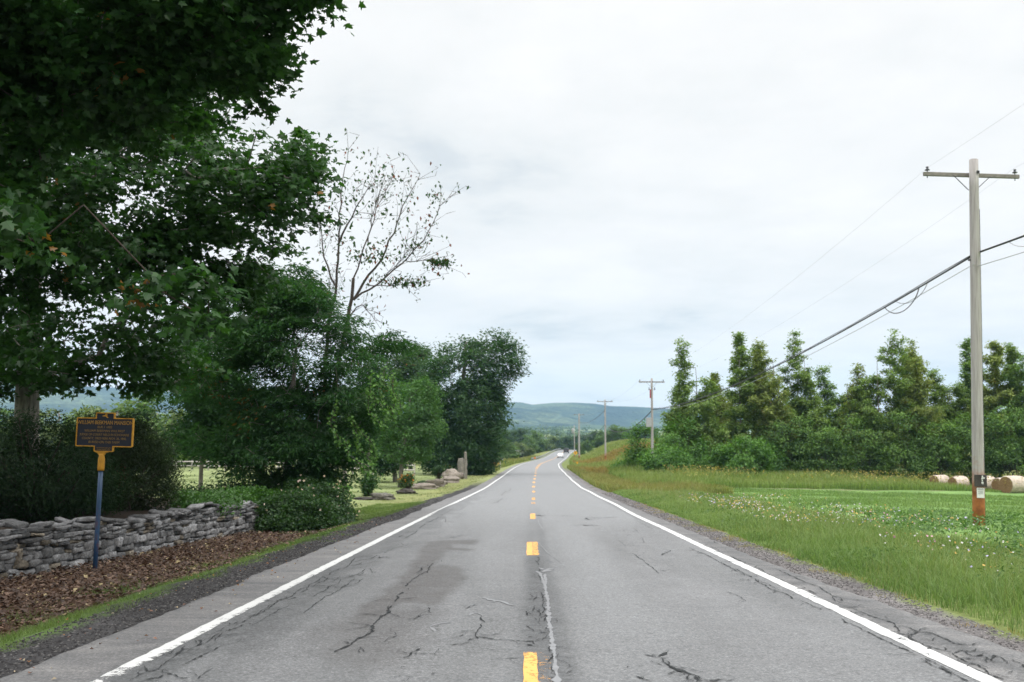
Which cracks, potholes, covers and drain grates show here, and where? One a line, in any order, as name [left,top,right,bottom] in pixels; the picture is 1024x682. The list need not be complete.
crack [433,593,572,673]
crack [538,515,1024,682]
crack [237,509,461,625]
crack [334,560,442,680]
